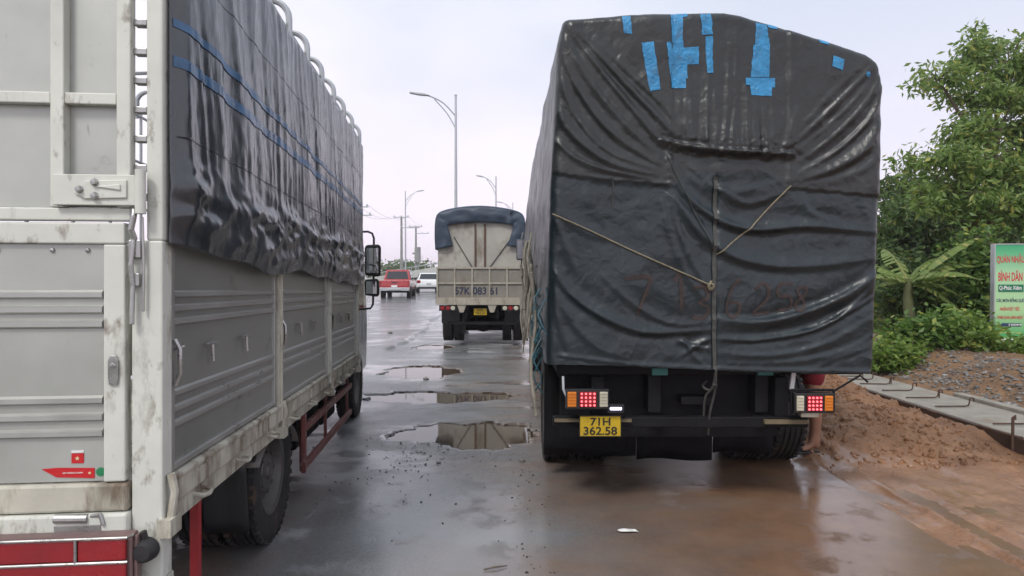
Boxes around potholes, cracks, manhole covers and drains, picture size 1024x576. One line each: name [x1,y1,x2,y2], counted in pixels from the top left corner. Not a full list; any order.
pothole [373,364,466,380]
pothole [379,420,541,452]
pothole [362,390,526,405]
